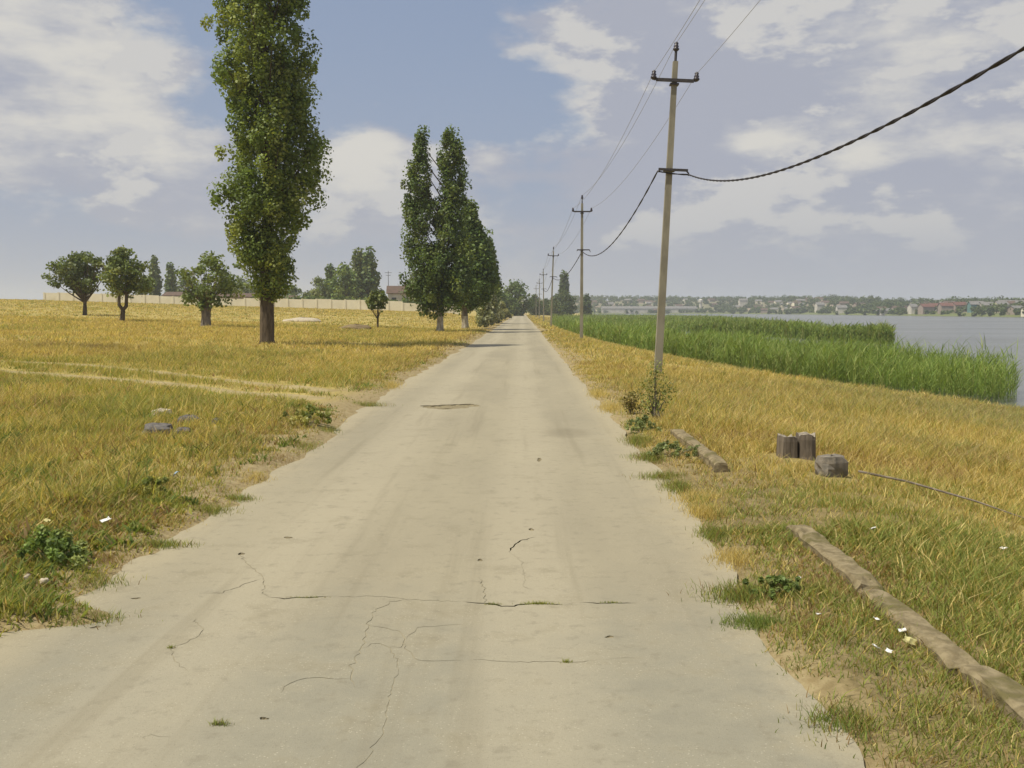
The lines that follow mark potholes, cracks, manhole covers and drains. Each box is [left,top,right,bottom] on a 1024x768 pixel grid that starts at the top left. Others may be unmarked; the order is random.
crack [223,538,611,607]
crack [283,601,454,767]
